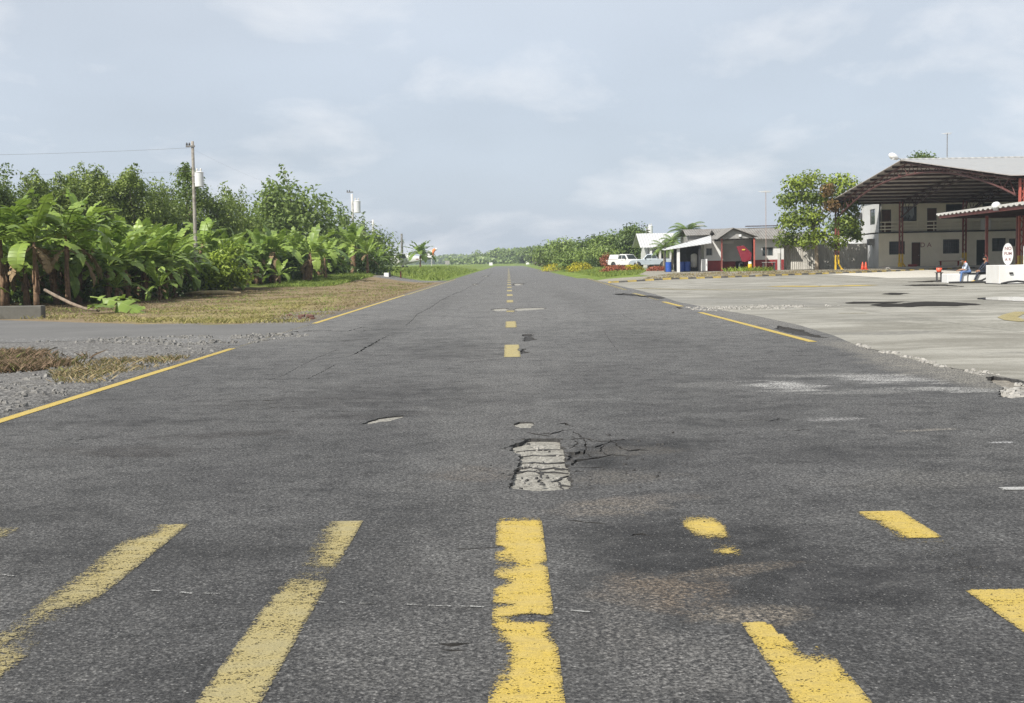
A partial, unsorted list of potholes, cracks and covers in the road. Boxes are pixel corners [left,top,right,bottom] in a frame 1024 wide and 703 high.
pothole [358,415,404,425]
crack [515,423,649,490]
pothole [774,325,827,338]
crack [273,279,484,379]
pothole [986,376,1024,397]
pothole [509,438,574,491]
